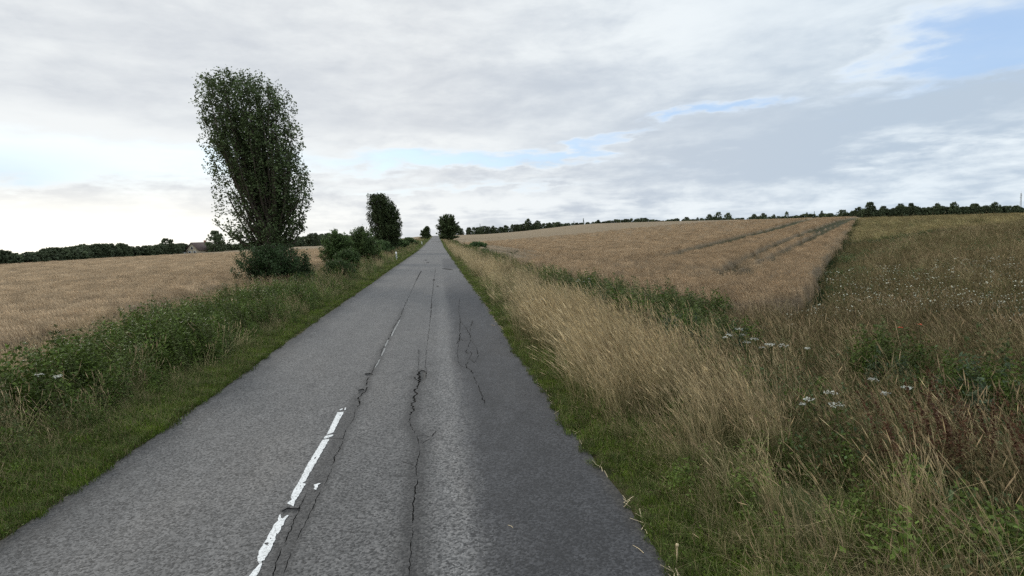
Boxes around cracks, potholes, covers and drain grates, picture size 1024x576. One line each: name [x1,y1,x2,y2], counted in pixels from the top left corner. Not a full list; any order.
crack [457,300,485,403]
crack [396,268,452,575]
